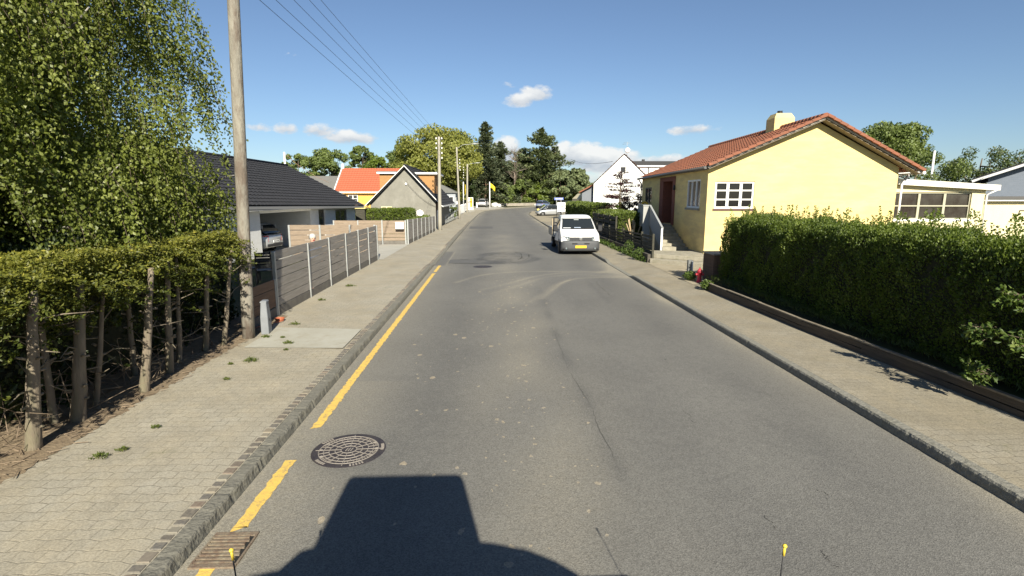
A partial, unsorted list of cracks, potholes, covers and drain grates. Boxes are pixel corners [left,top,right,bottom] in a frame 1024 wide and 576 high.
manhole cover [311,434,386,468]
drain grate [187,531,259,570]
